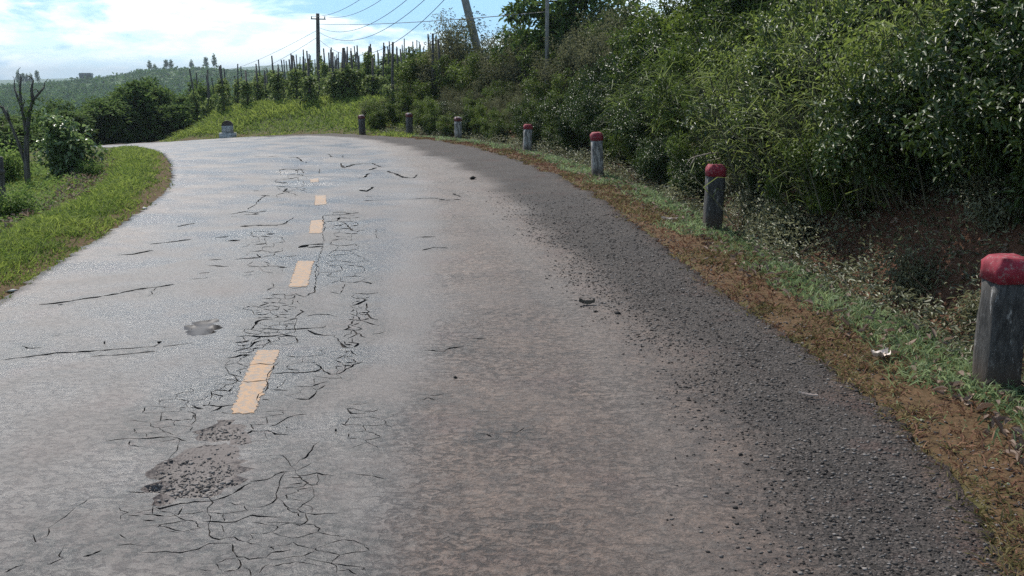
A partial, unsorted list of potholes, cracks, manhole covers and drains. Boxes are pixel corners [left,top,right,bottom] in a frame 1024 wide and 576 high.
pothole [184,318,223,336]
crack [83,154,417,575]
pothole [193,420,252,446]
crack [39,284,174,305]
pothole [140,443,255,507]
crack [4,335,188,360]
